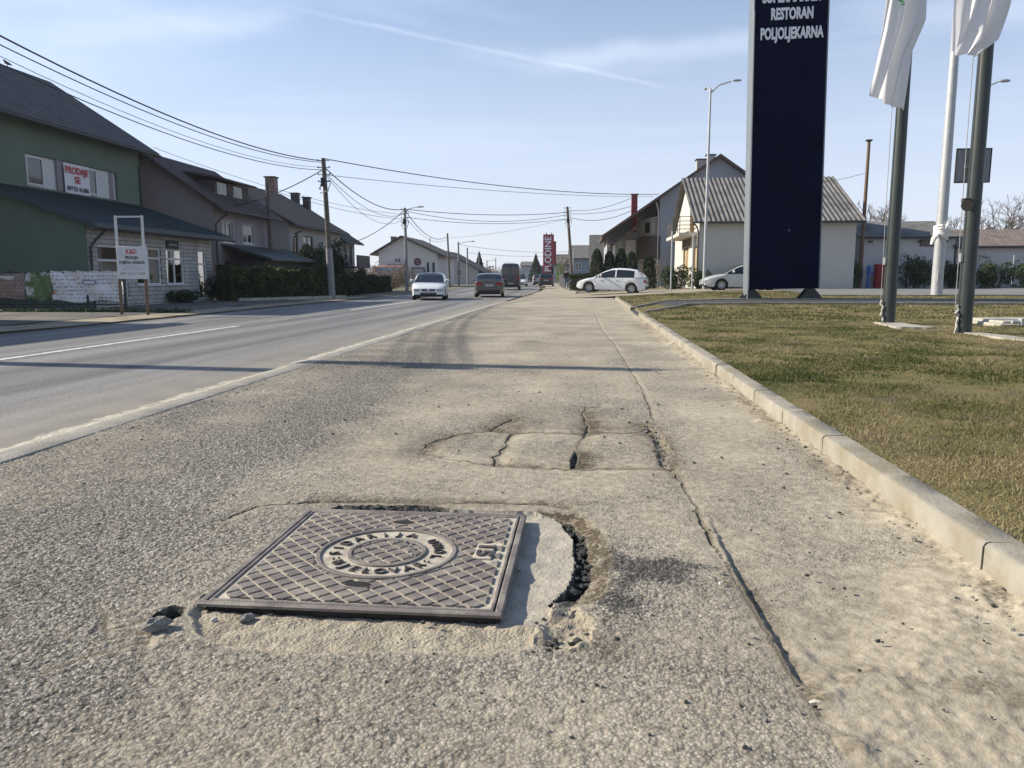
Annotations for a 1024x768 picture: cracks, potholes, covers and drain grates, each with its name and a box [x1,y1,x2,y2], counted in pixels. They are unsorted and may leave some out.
manhole cover [196,508,576,629]
pothole [533,607,597,654]
pothole [146,605,186,620]
crack [417,313,822,717]
pothole [548,519,593,608]
